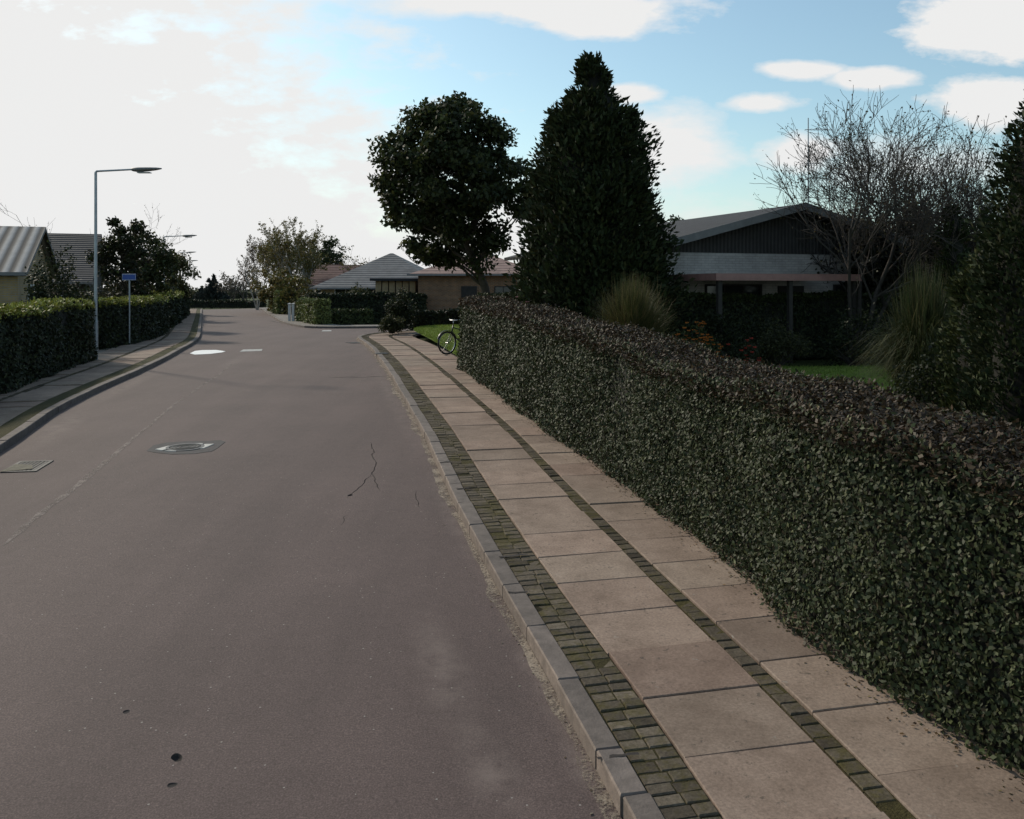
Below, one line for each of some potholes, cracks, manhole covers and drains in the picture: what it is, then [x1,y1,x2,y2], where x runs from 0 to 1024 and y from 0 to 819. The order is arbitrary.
crack [349,444,379,496]
manhole cover [155,443,214,451]
